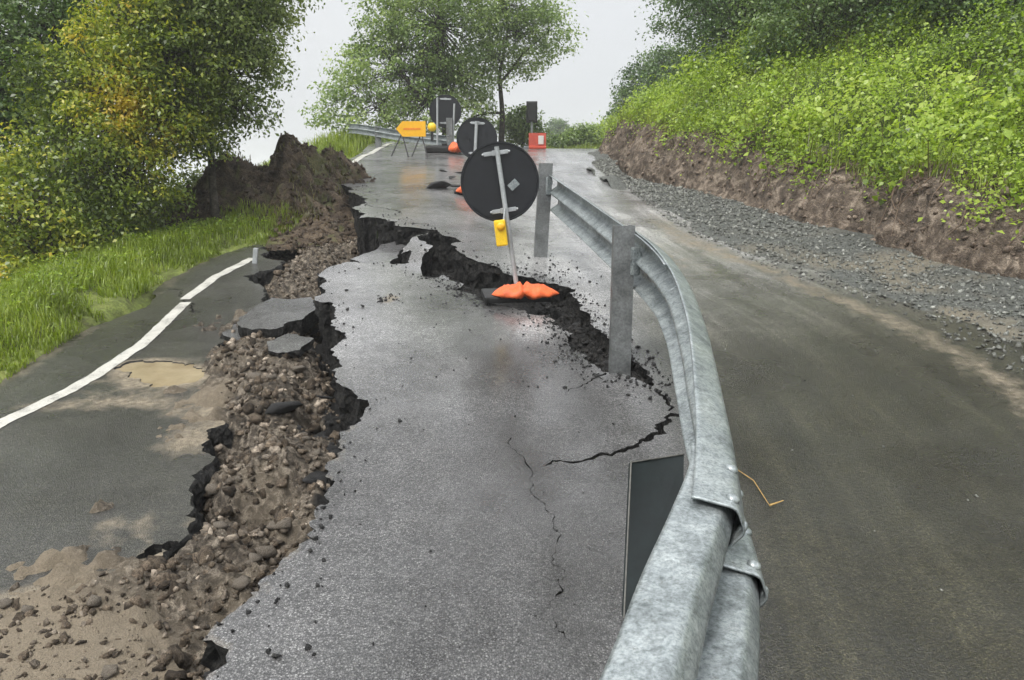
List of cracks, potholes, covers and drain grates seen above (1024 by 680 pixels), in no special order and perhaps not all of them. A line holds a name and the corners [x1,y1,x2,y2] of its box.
crack [0,185,679,680]
pothole [113,360,205,387]
